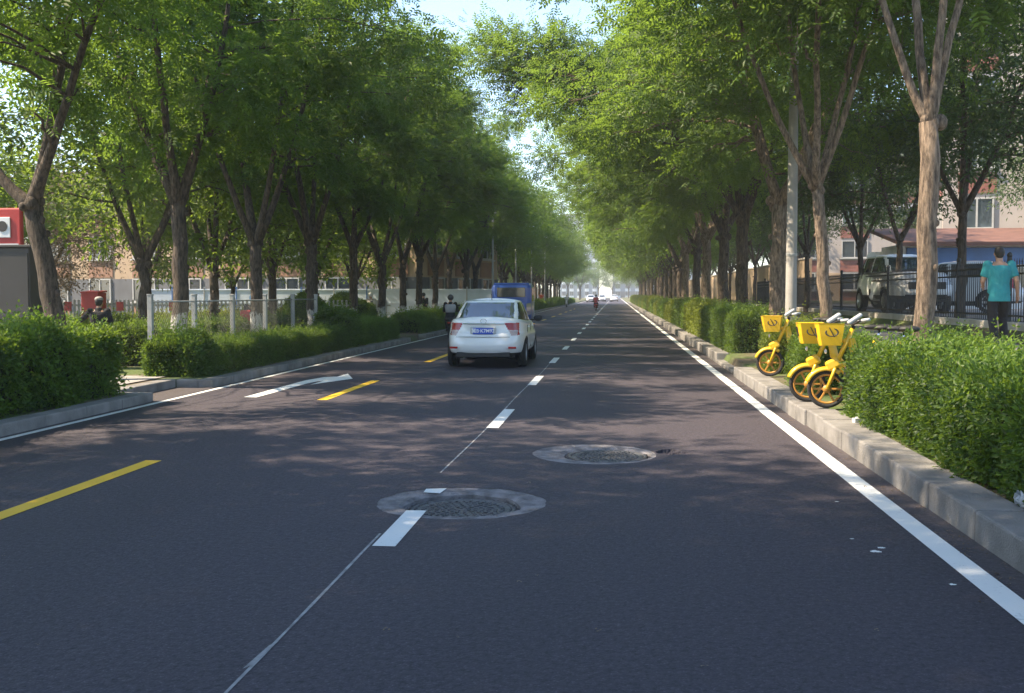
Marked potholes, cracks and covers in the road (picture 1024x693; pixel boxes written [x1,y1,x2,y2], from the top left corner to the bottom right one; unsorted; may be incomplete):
manhole cover [533,444,656,464]
manhole cover [377,488,546,519]
